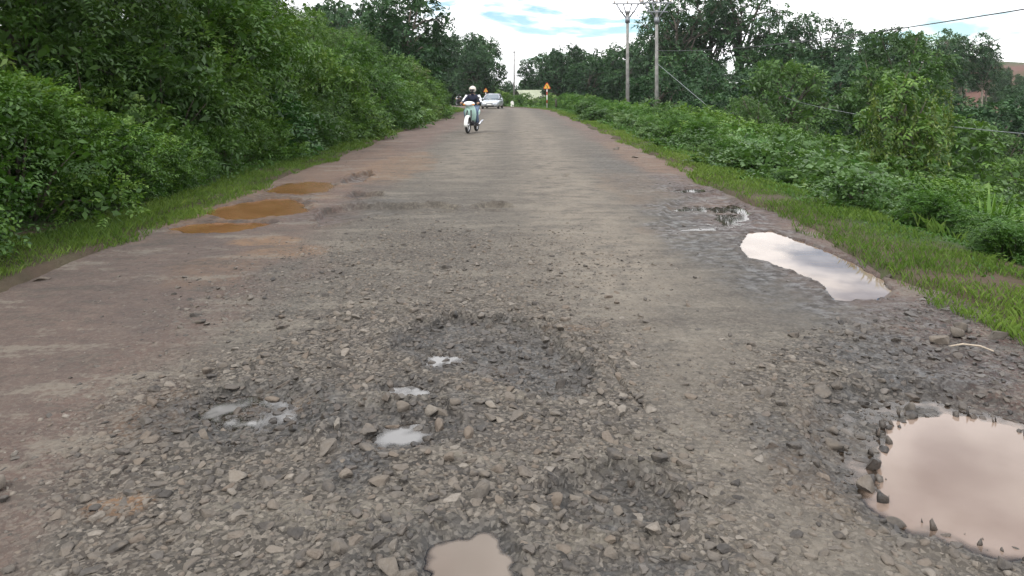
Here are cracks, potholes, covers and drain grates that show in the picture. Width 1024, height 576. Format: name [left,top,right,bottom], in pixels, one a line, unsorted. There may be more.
pothole [168,376,334,457]
pothole [733,229,903,302]
pothole [197,196,319,220]
pothole [397,507,547,576]
pothole [792,374,1024,574]
pothole [535,452,704,537]
pothole [161,218,297,235]
pothole [652,193,761,232]
pothole [260,181,342,195]
pothole [381,310,605,406]
pothole [320,392,477,454]
pothole [339,190,387,200]
